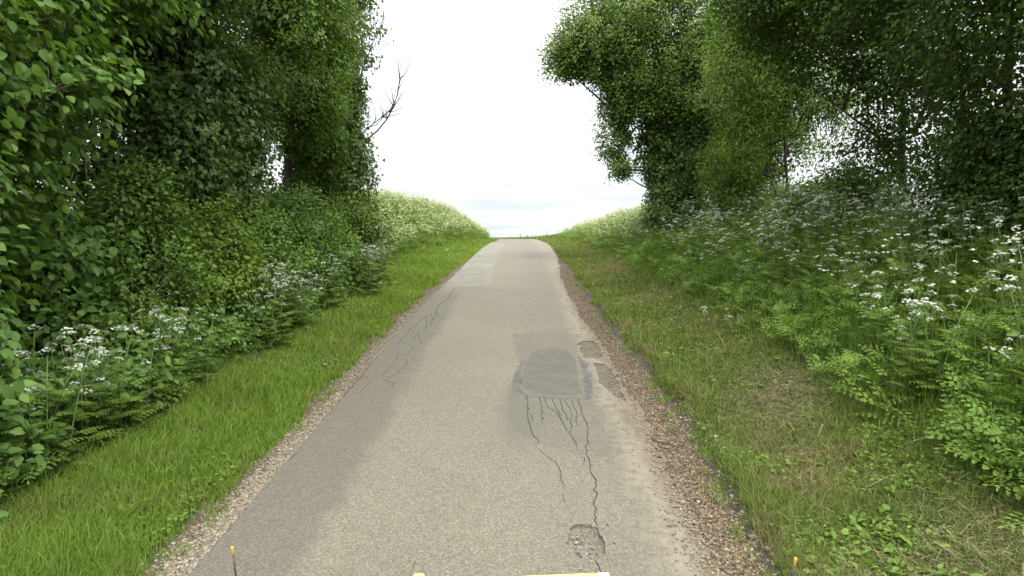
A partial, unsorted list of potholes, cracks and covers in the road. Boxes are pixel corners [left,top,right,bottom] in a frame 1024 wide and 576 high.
crack [526,396,598,527]
crack [343,288,455,397]
pothole [566,524,606,560]
